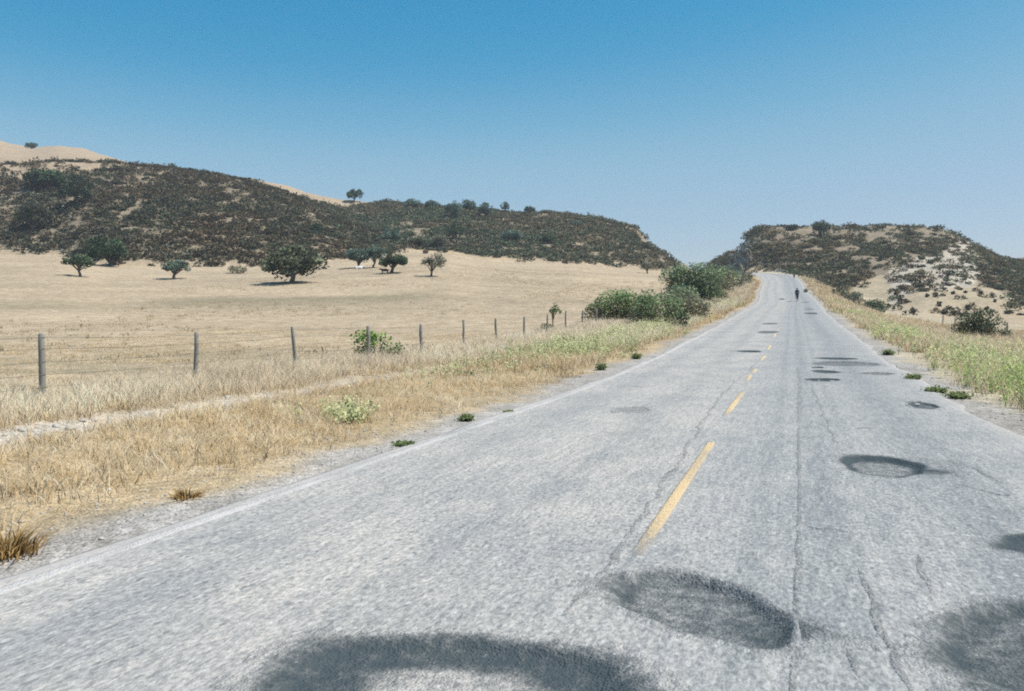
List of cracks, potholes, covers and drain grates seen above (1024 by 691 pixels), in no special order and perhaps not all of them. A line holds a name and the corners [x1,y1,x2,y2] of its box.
pothole [208,626,693,691]
pothole [824,452,984,480]
pothole [905,401,943,410]
pothole [571,565,880,664]
crack [846,553,933,691]
pothole [980,532,1024,557]
crack [562,361,759,615]
